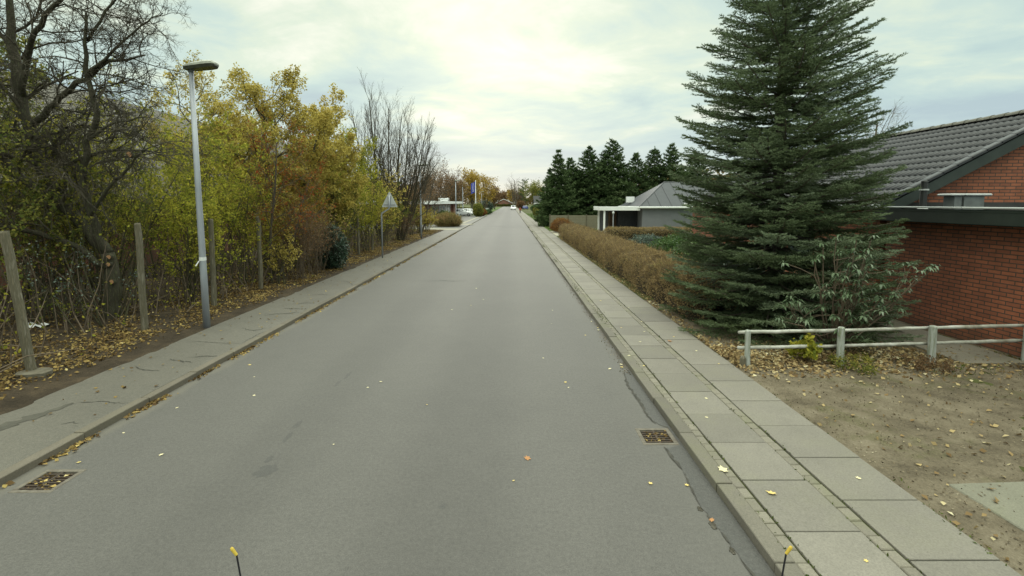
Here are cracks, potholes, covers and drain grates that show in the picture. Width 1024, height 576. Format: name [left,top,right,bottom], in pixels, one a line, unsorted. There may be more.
drain grate [8,469,87,493]
drain grate [635,428,679,445]
